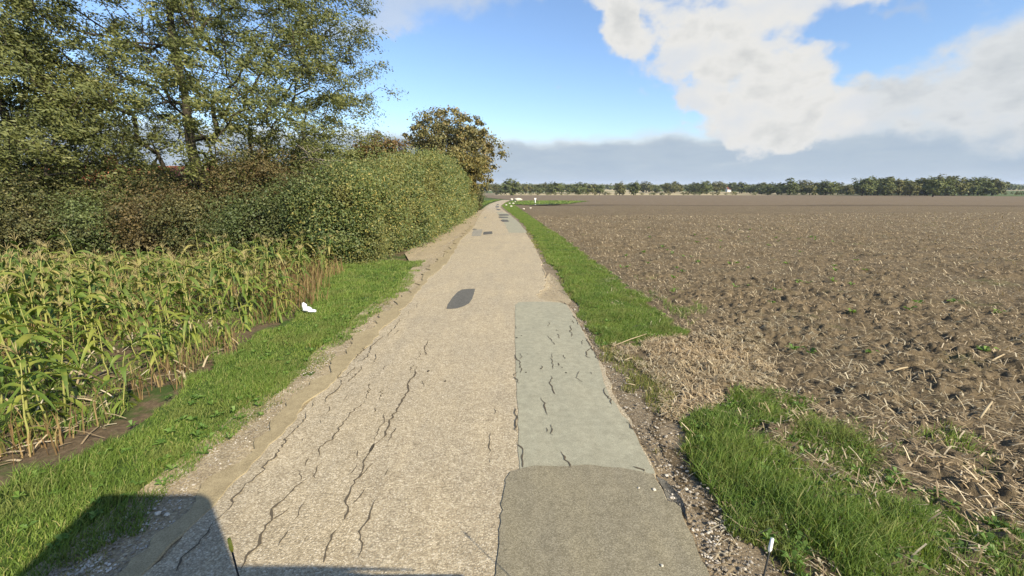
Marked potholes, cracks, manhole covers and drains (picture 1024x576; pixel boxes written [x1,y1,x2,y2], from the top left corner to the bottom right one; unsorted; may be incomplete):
crack [176,305,428,571]
crack [541,301,612,434]
